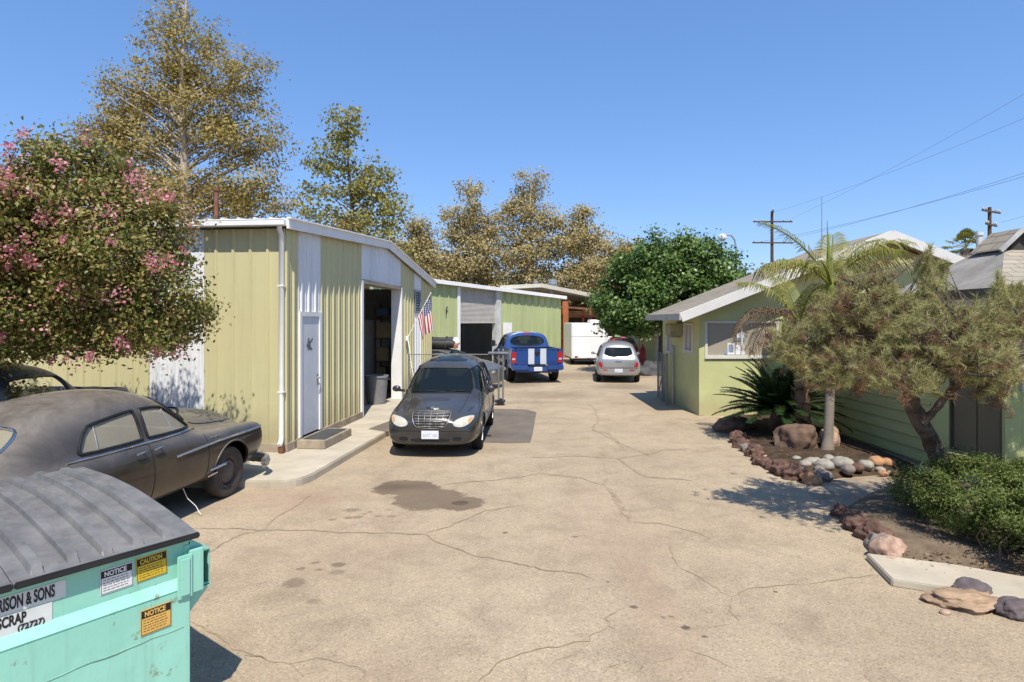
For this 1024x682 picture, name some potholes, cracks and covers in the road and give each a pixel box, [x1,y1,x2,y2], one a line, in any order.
crack [476,608,623,682]
crack [190,621,366,675]
crack [669,543,877,628]
crack [197,495,593,579]
crack [450,404,711,539]
